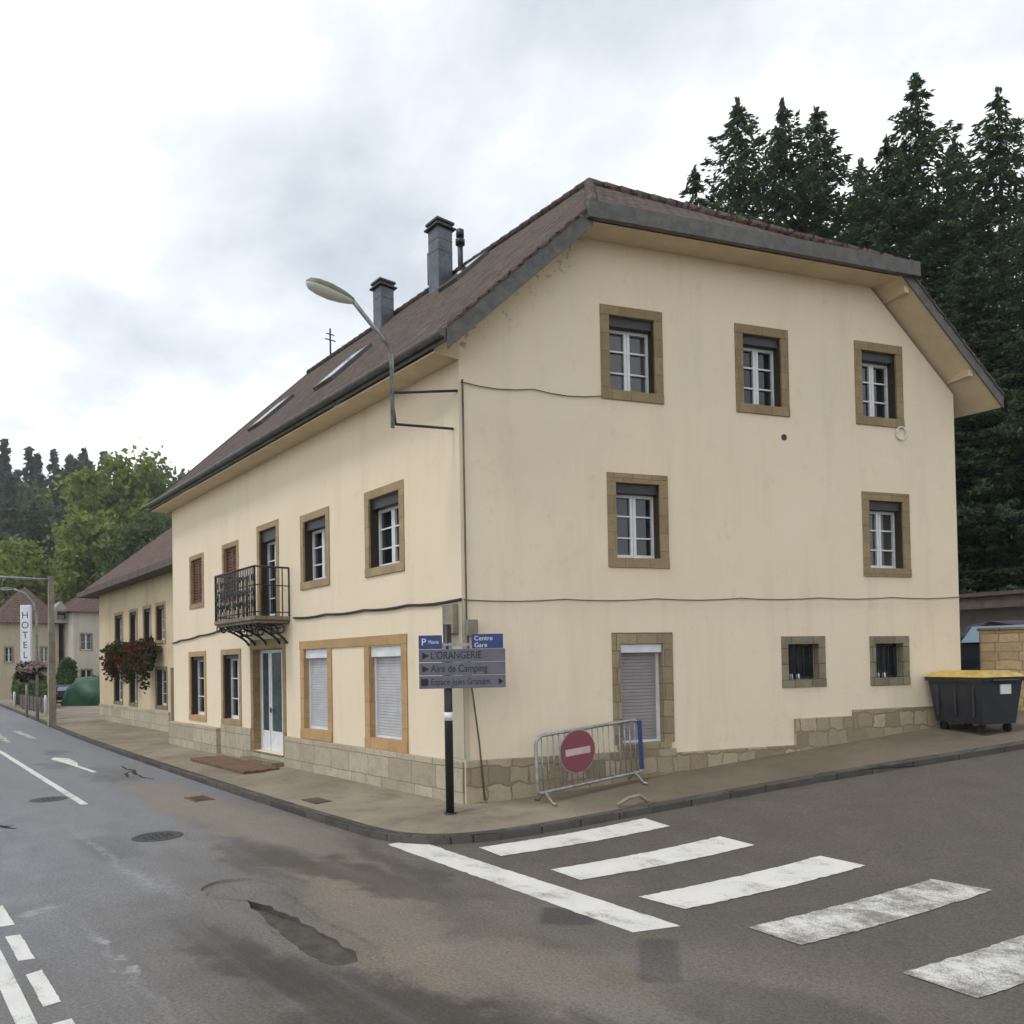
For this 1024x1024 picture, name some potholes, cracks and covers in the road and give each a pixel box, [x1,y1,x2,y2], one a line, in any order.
pothole [178,873,413,990]
crack [122,766,151,779]
manhole cover [131,831,184,842]
